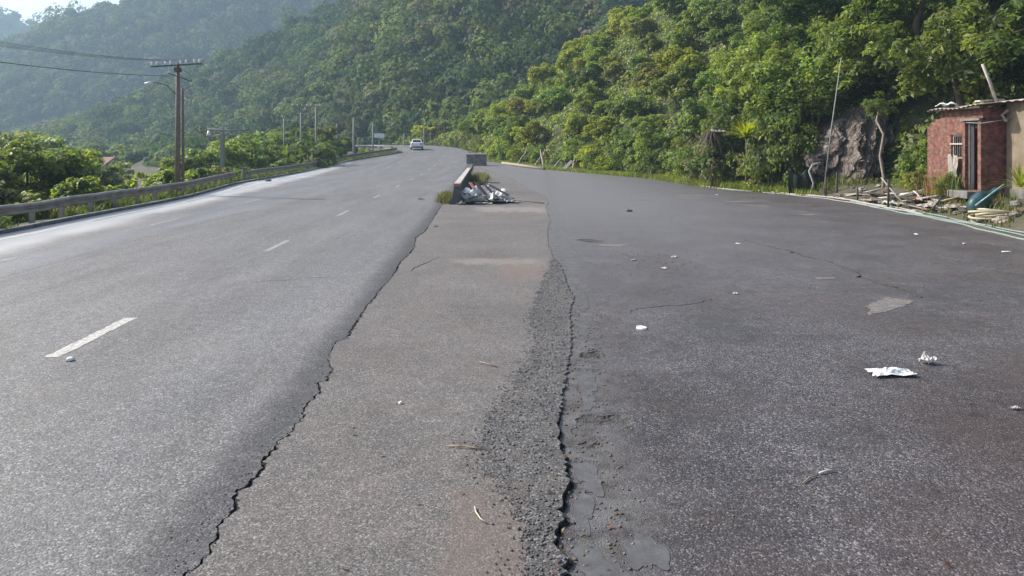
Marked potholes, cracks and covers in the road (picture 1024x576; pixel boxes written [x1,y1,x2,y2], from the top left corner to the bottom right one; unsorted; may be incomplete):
crack [182,204,443,576]
crack [554,408,574,576]
crack [745,240,924,299]
